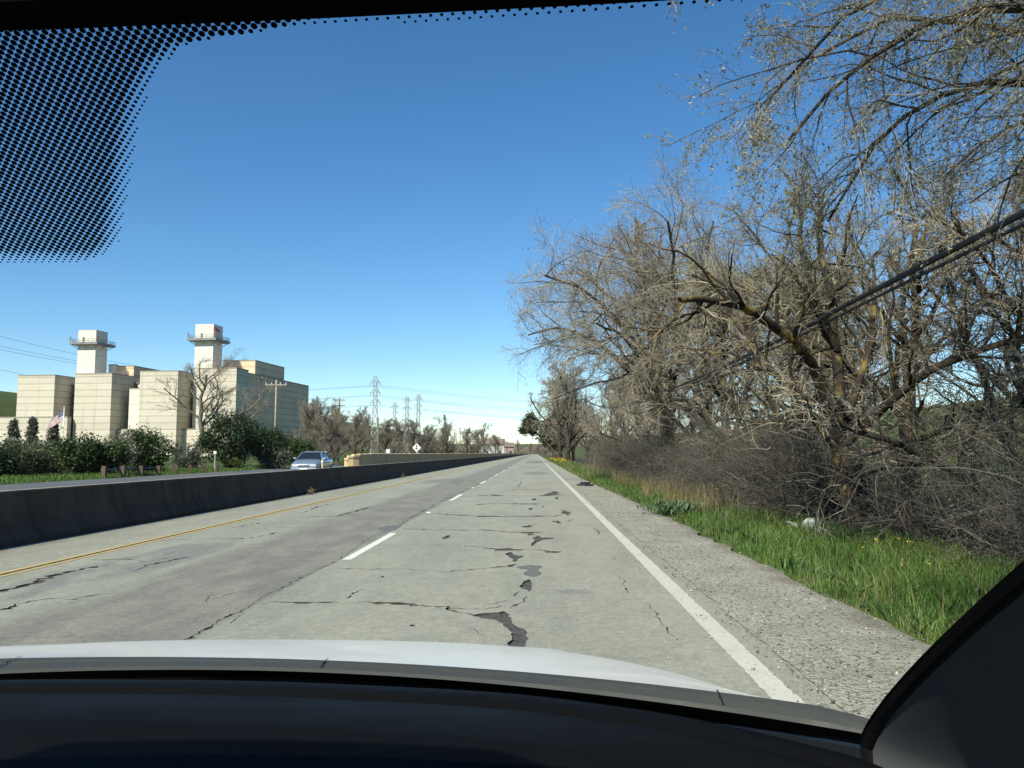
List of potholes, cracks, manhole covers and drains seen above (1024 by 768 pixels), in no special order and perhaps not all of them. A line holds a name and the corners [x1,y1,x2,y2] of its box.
pothole [472,611,528,647]
crack [0,504,370,610]
crack [185,464,571,640]
